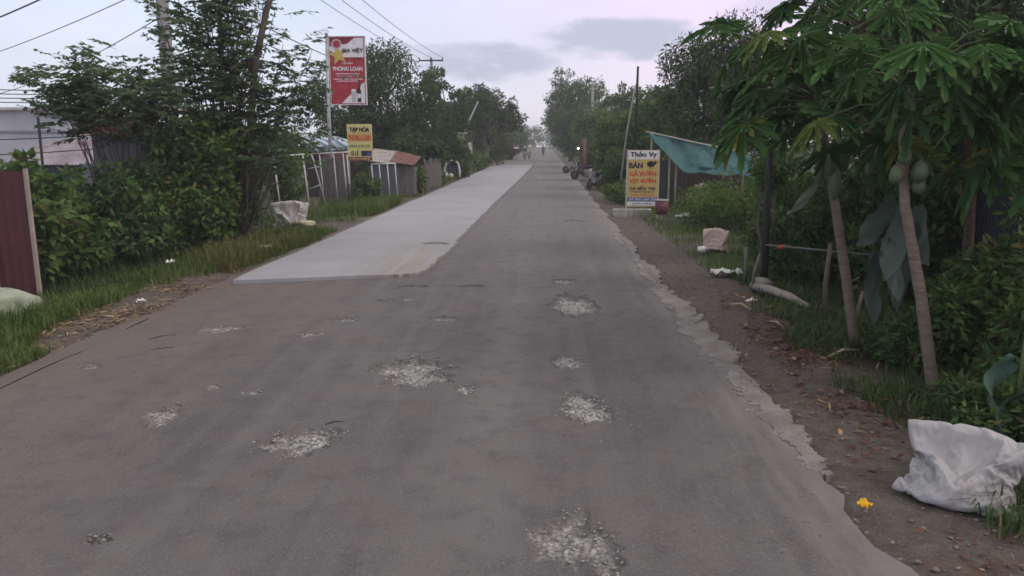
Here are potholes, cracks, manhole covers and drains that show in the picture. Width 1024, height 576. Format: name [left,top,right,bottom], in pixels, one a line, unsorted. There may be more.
crack [127,318,171,350]
pothole [112,402,196,430]
pothole [502,495,634,576]
pothole [71,362,104,370]
pothole [80,533,121,545]
pothole [536,292,606,324]
pothole [554,383,631,442]
crack [0,349,88,389]
pothole [186,324,253,333]
pothole [246,425,354,459]
pothole [325,315,359,324]
pothole [548,354,588,371]
